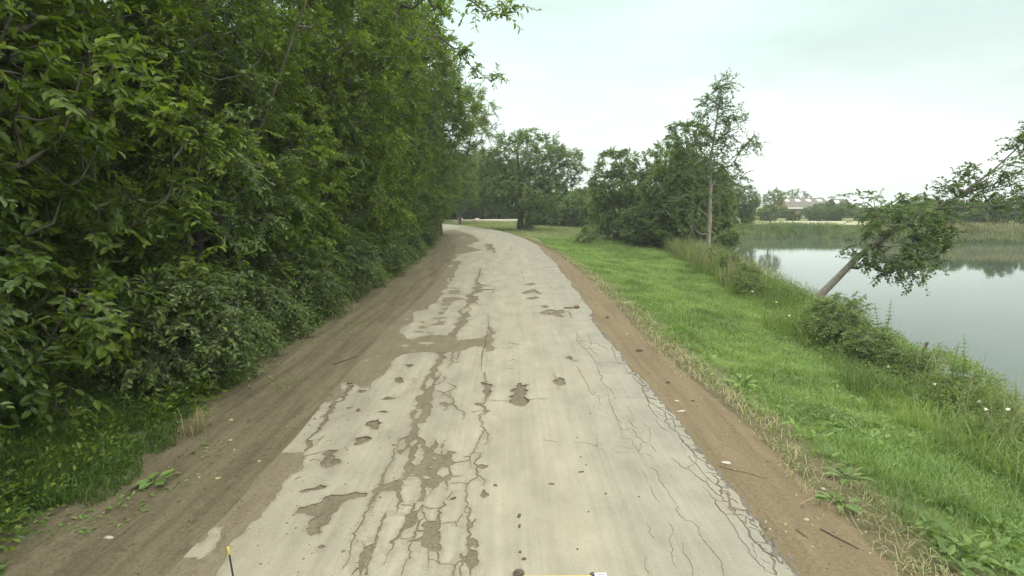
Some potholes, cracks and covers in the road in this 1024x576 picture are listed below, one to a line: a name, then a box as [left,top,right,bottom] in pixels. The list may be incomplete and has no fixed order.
pothole [295,492,367,536]
pothole [495,383,529,406]
crack [576,333,783,576]
crack [296,268,514,576]
pothole [320,450,341,468]
pothole [540,309,572,318]
pothole [365,419,381,430]
